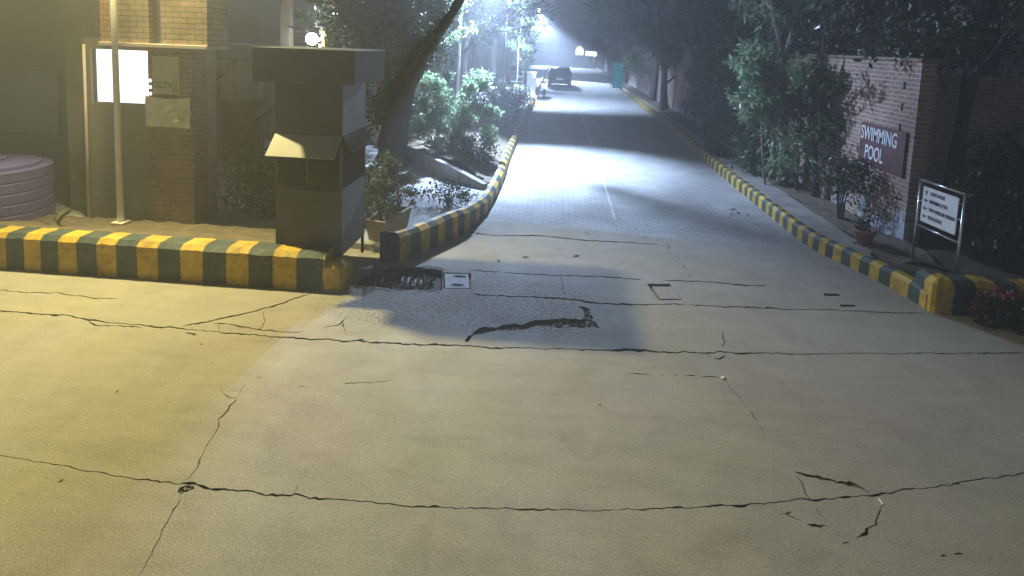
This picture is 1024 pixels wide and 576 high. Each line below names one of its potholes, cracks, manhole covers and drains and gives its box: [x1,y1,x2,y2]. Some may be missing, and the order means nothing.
manhole cover [648,284,682,300]
pothole [465,306,599,342]
crack [471,232,921,314]
crack [1,377,1024,576]
manhole cover [442,272,471,289]
crack [0,290,1021,433]
drain grate [355,266,442,291]
